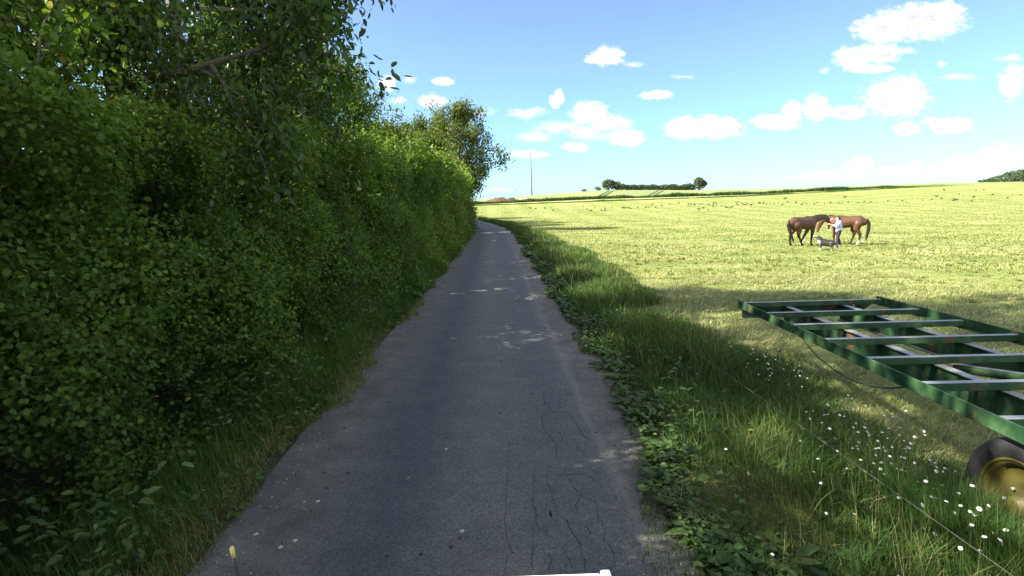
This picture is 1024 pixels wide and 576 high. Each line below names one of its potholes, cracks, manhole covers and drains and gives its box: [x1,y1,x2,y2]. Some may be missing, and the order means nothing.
crack [504,445,516,570]
crack [531,393,617,573]
